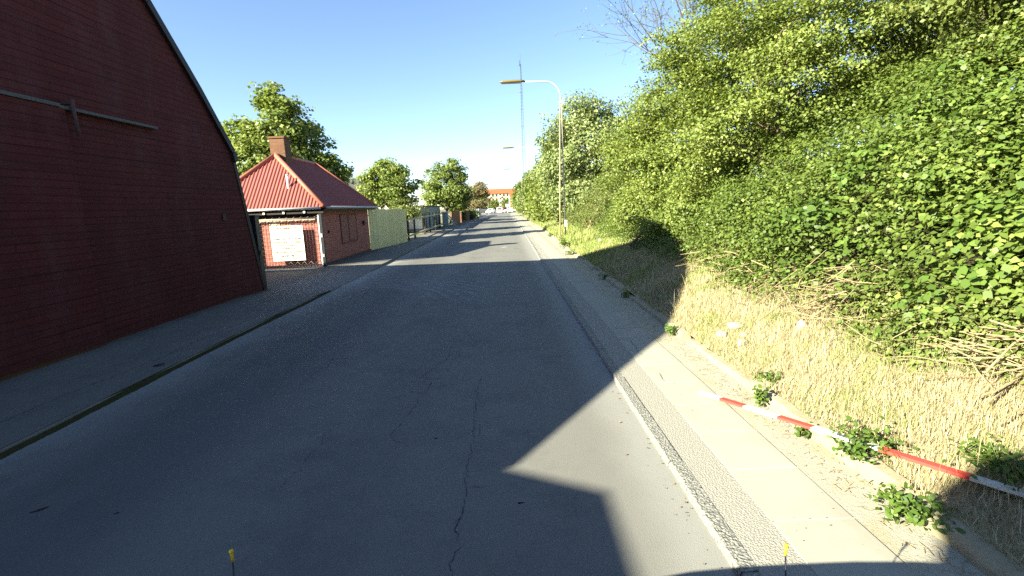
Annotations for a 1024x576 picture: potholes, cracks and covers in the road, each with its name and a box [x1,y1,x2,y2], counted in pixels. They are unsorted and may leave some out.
crack [449,376,482,575]
crack [390,347,467,442]
